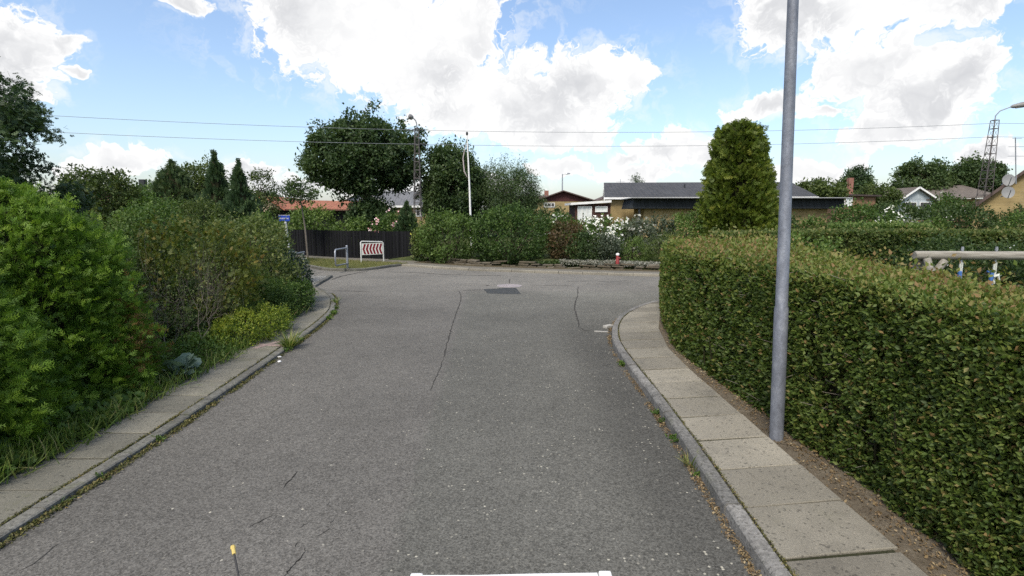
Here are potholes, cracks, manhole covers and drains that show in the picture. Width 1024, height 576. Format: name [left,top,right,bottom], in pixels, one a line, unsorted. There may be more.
crack [430,290,465,390]
